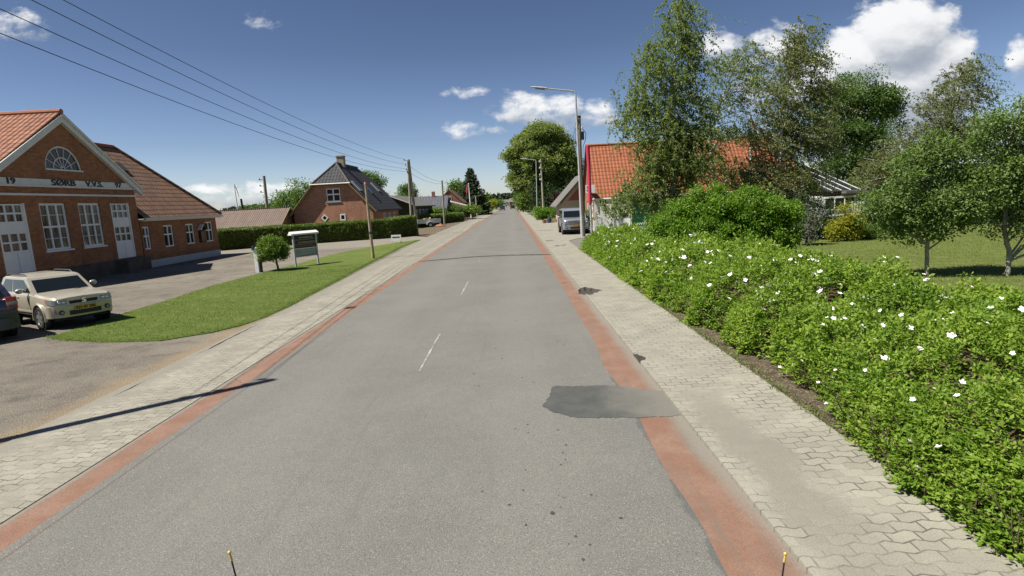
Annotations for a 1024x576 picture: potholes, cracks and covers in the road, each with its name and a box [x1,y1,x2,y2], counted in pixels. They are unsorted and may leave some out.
pothole [578,287,602,295]
